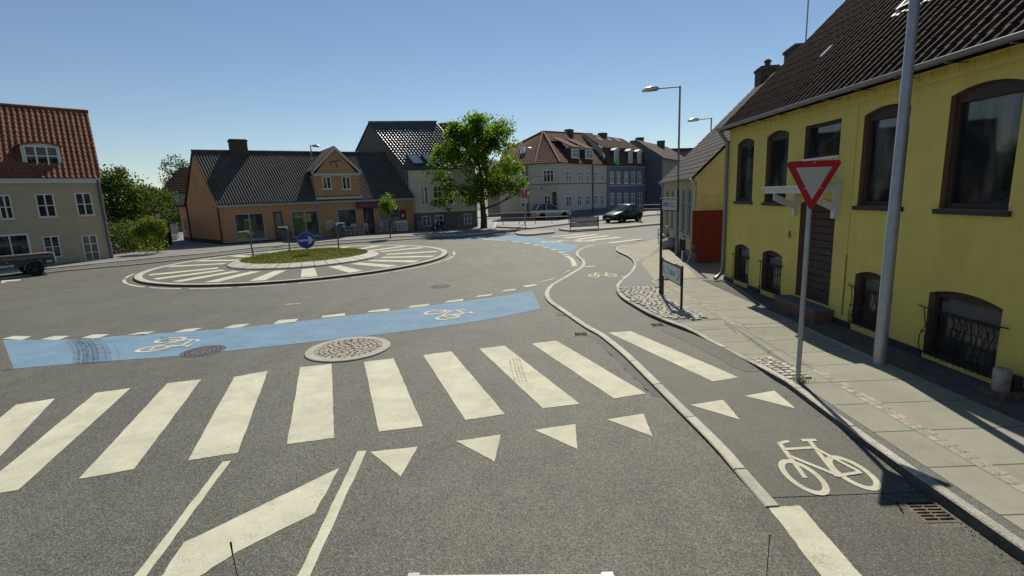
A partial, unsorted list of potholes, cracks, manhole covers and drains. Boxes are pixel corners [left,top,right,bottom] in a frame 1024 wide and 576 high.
manhole cover [180,345,226,358]
manhole cover [304,336,391,363]
drain grate [898,499,963,523]
